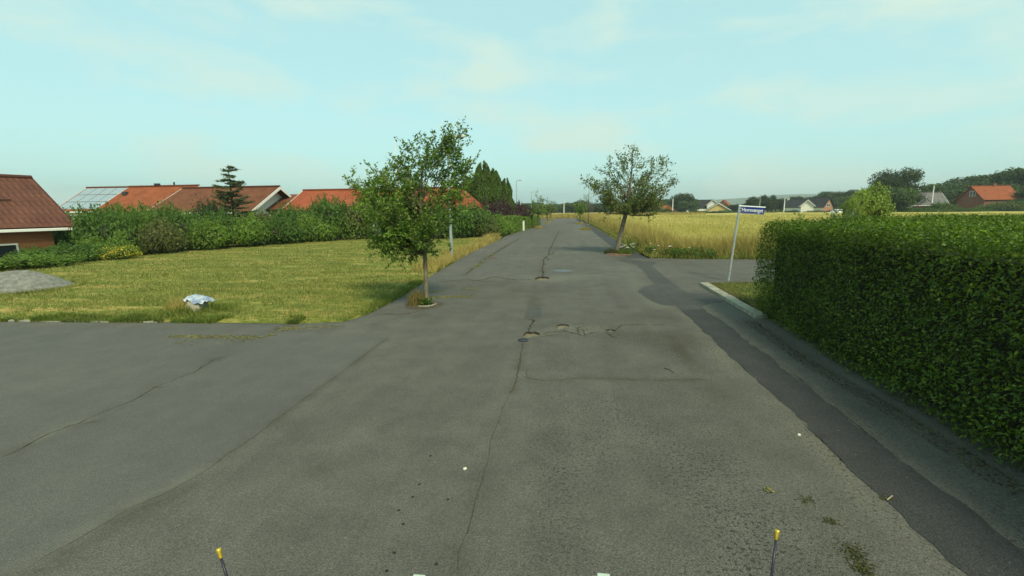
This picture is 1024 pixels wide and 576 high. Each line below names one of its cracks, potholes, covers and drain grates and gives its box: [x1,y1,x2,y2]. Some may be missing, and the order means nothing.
crack [3,358,218,457]
crack [528,319,664,338]
crack [454,239,530,282]
